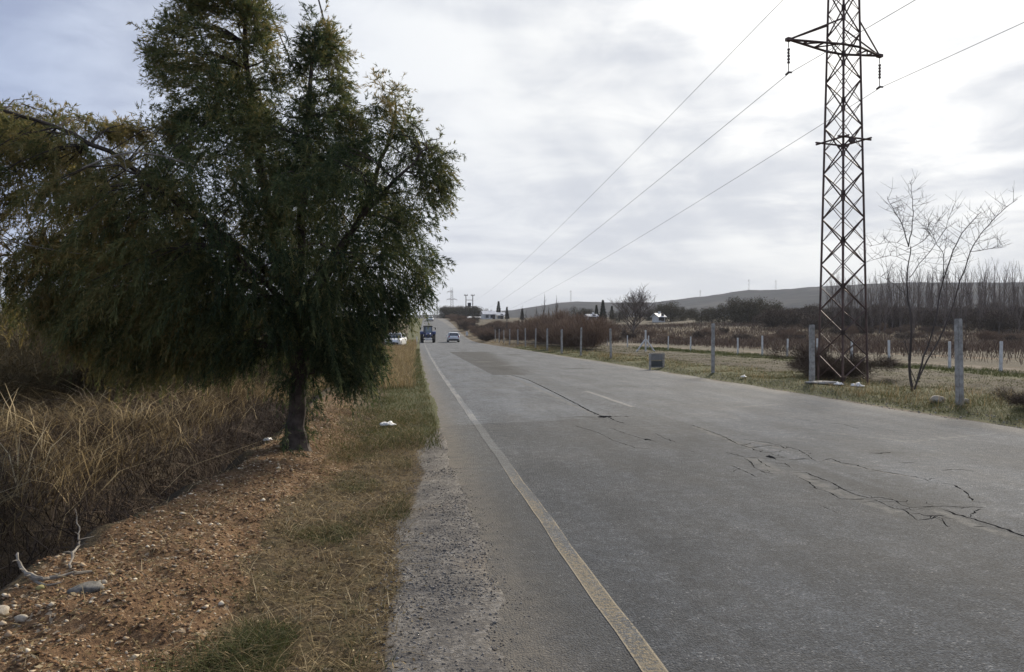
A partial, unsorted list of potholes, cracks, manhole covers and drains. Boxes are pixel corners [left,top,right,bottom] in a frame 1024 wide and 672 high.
crack [693,425,985,527]
